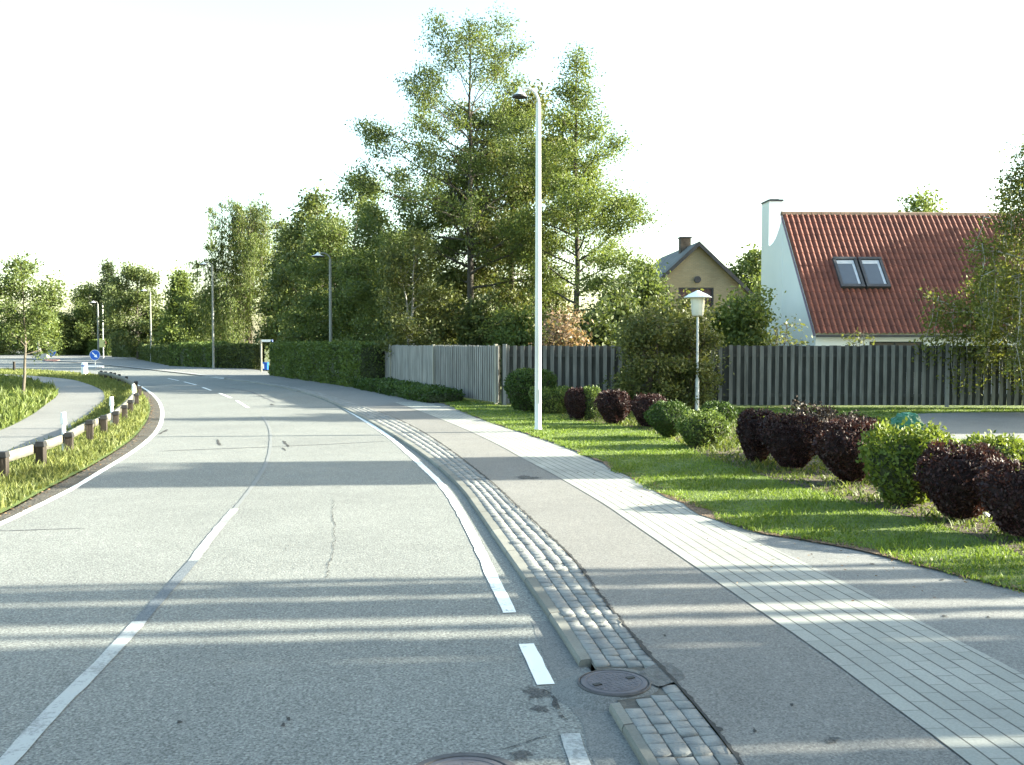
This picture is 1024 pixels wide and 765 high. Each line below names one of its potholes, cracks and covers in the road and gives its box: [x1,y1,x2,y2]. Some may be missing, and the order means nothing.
manhole cover [577,669,651,697]
manhole cover [416,752,515,765]
